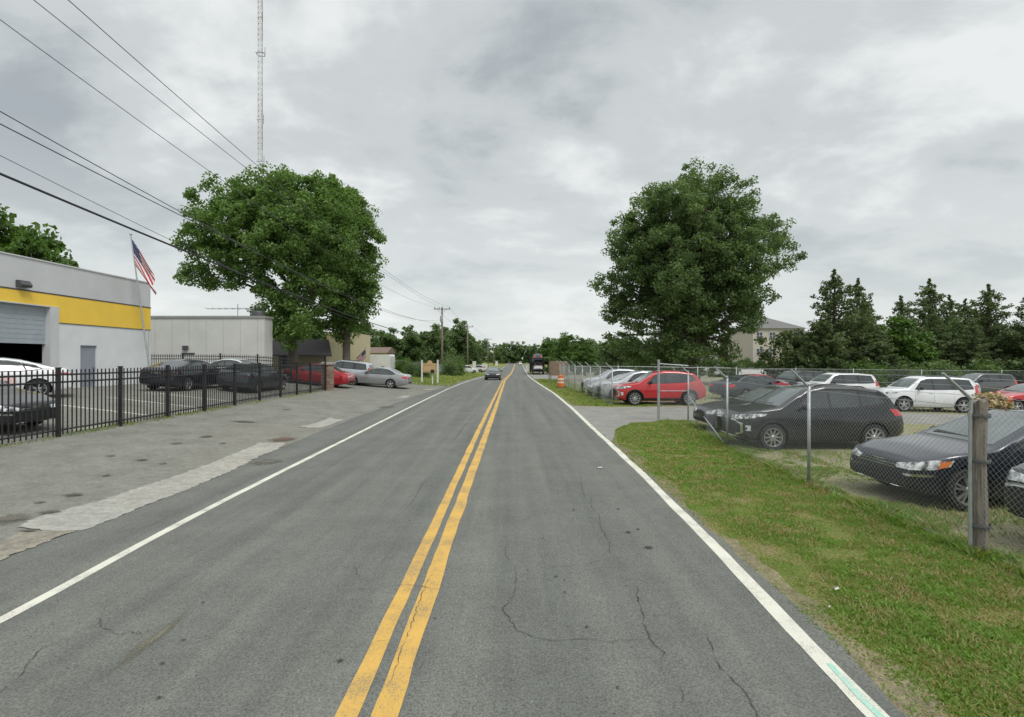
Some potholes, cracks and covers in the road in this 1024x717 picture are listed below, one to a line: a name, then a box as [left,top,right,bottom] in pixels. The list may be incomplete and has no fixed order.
crack [705,633,758,717]
crack [486,549,667,670]
crack [479,475,613,568]
crack [356,568,429,685]
